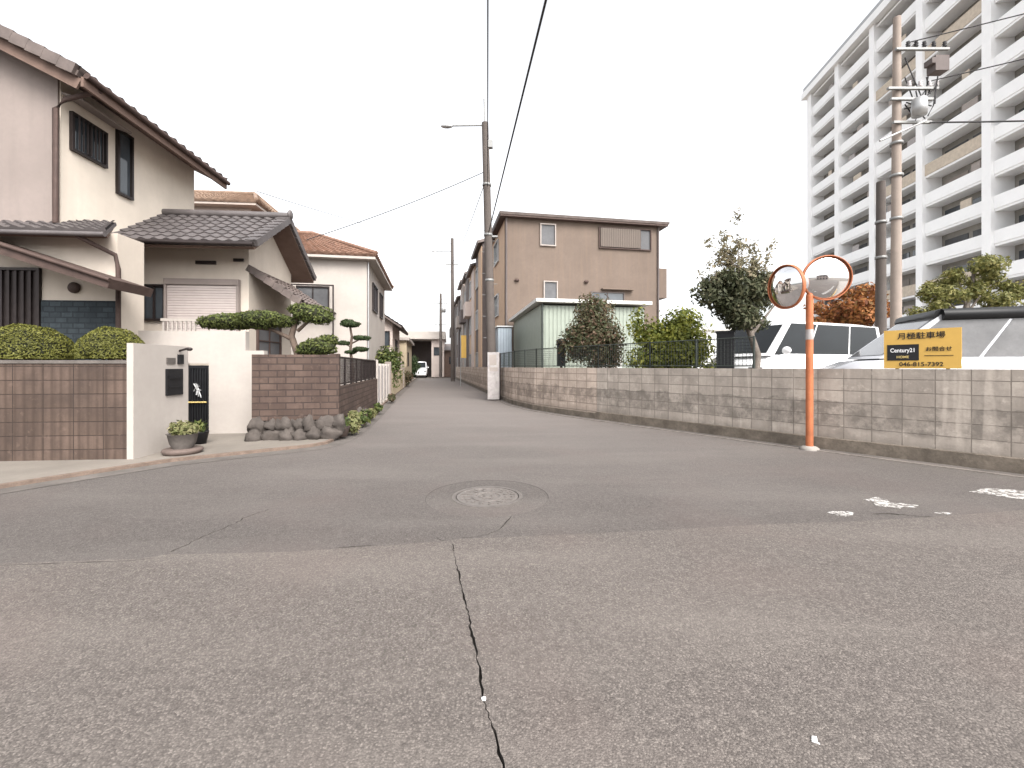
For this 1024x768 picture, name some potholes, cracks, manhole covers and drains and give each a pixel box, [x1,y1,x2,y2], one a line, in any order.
manhole cover [425,480,548,517]
crack [437,517,511,768]
